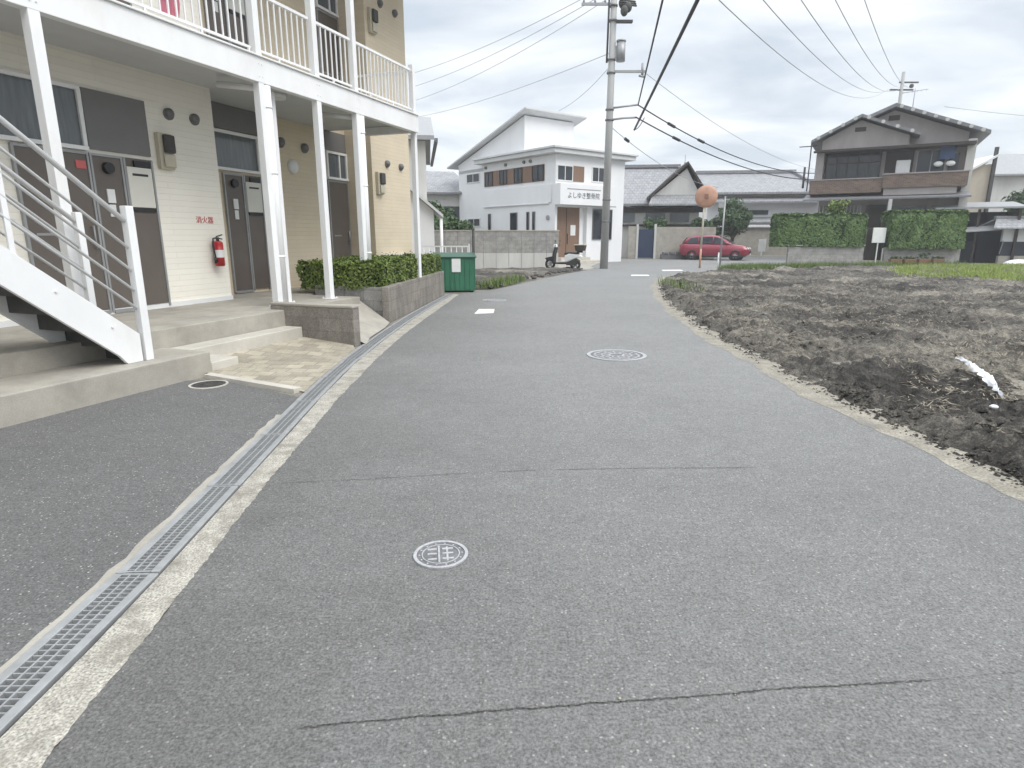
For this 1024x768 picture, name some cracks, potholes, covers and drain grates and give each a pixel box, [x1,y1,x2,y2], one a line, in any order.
manhole cover [587,349,647,361]
crack [297,672,1014,729]
crack [293,467,755,483]
manhole cover [188,380,229,389]
manhole cover [413,540,468,570]
